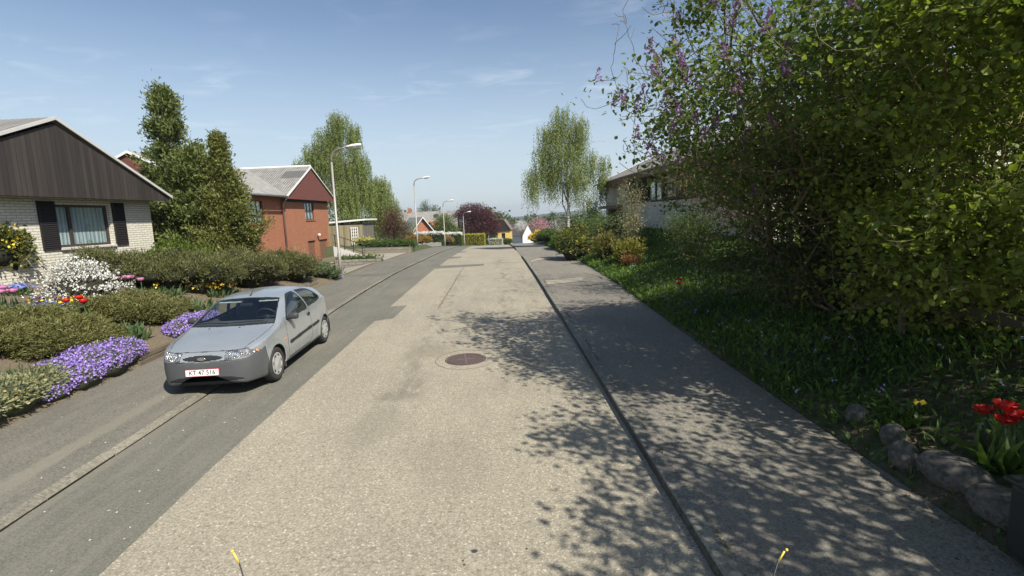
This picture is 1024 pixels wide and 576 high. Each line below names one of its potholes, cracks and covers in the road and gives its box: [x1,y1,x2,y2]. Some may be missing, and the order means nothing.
manhole cover [445,353,486,366]
